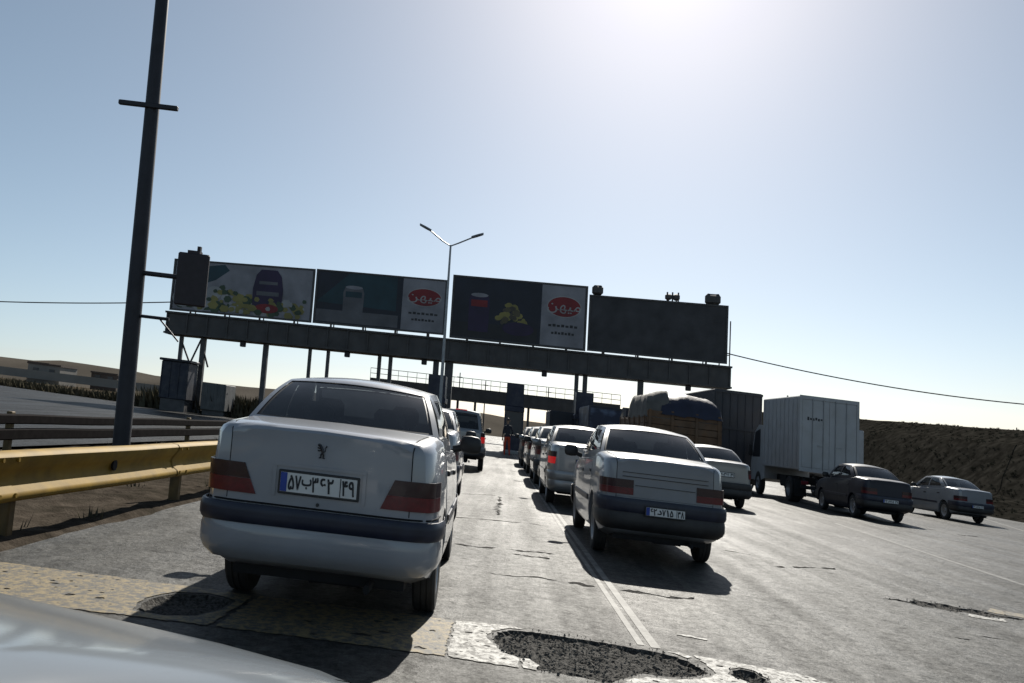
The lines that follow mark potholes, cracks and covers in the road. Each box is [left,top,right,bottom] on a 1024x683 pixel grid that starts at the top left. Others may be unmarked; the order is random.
crack [725,550,836,570]
pothole [492,630,708,683]
crack [456,494,538,525]
pothole [137,593,232,616]
pothole [732,669,767,683]
